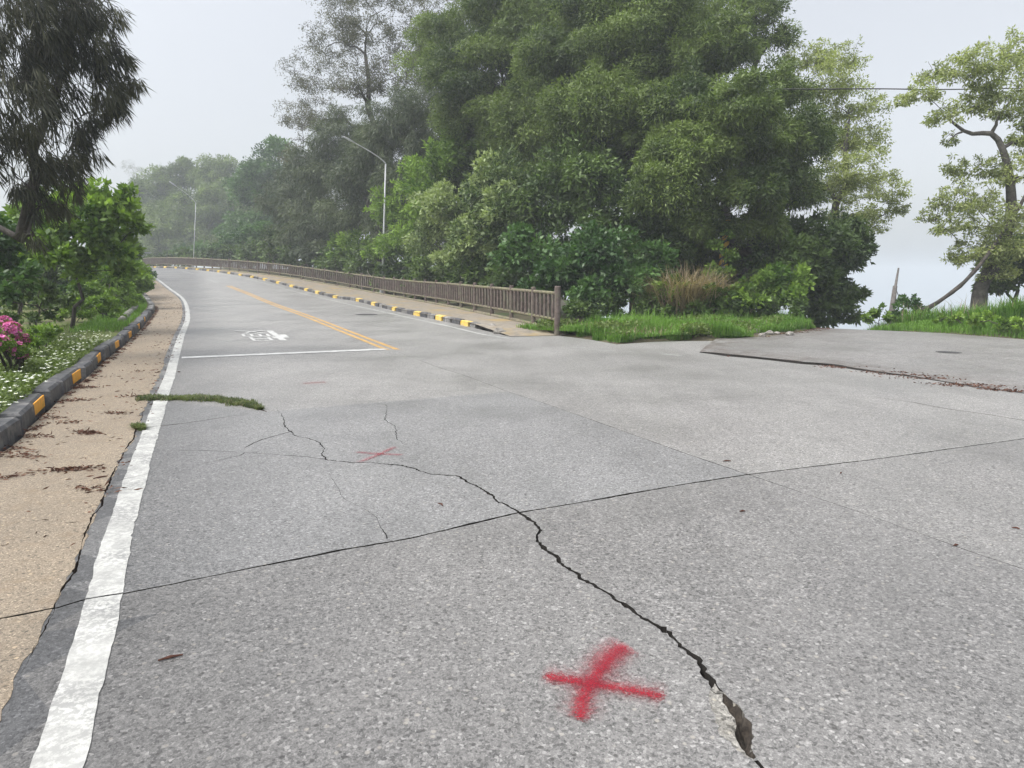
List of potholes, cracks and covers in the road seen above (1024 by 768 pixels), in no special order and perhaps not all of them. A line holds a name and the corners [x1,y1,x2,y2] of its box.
crack [9,399,764,768]
